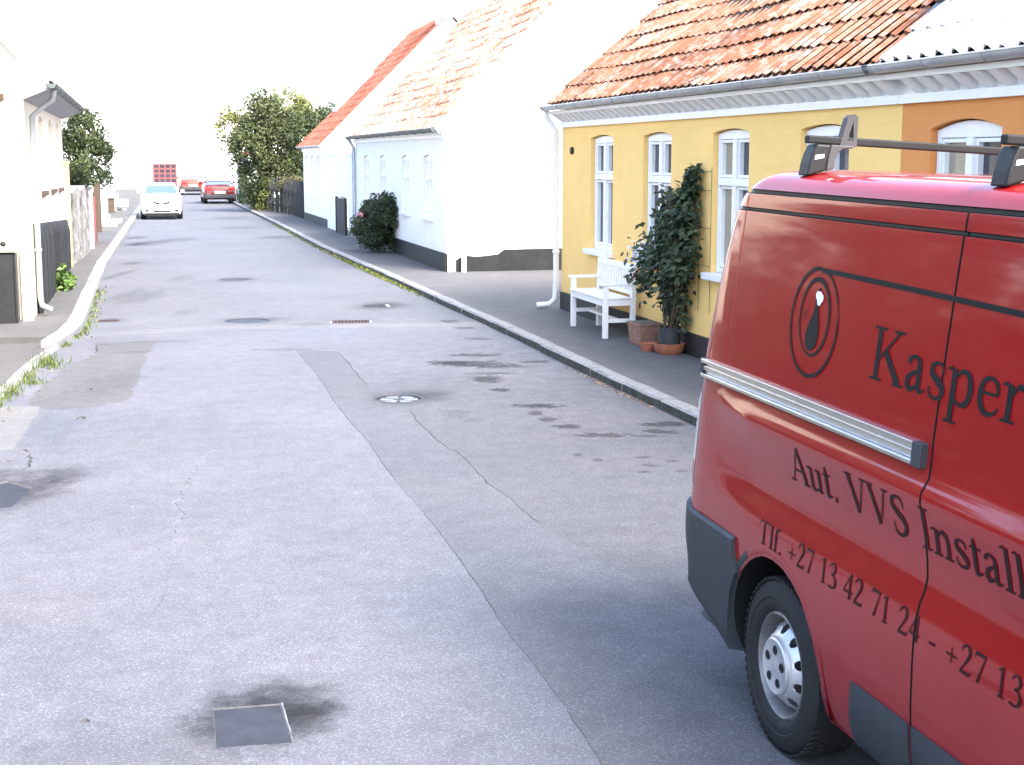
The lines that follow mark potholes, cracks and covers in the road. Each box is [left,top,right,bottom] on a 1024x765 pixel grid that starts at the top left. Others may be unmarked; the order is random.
manhole cover [374,395,424,403]
crack [158,447,218,550]
manhole cover [213,702,294,748]
crack [298,353,602,765]
crack [147,584,171,619]
manhole cover [0,481,33,508]
crack [0,449,33,474]
